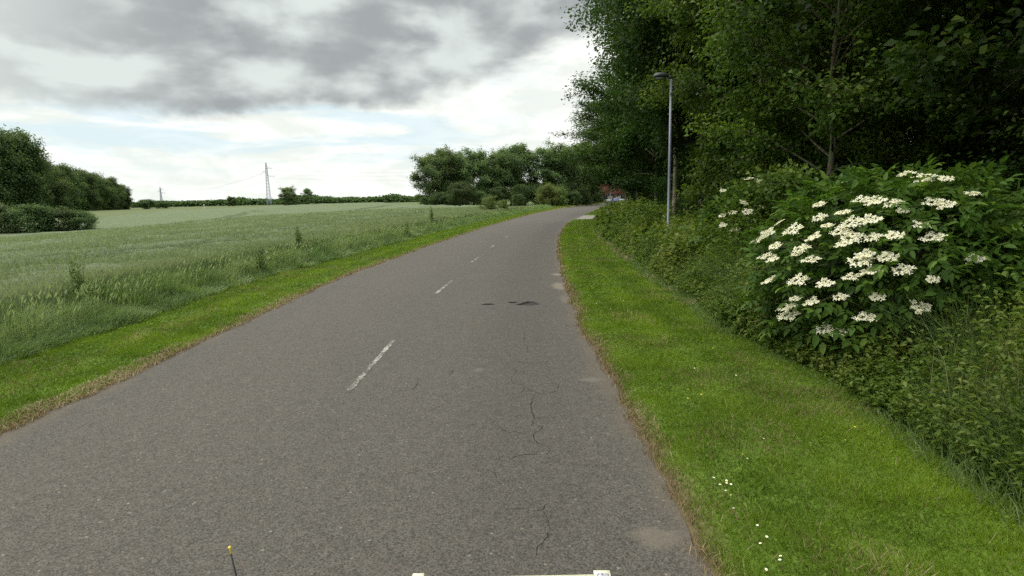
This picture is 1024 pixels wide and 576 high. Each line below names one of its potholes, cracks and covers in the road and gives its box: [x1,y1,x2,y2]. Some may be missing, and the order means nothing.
crack [492,333,558,459]
